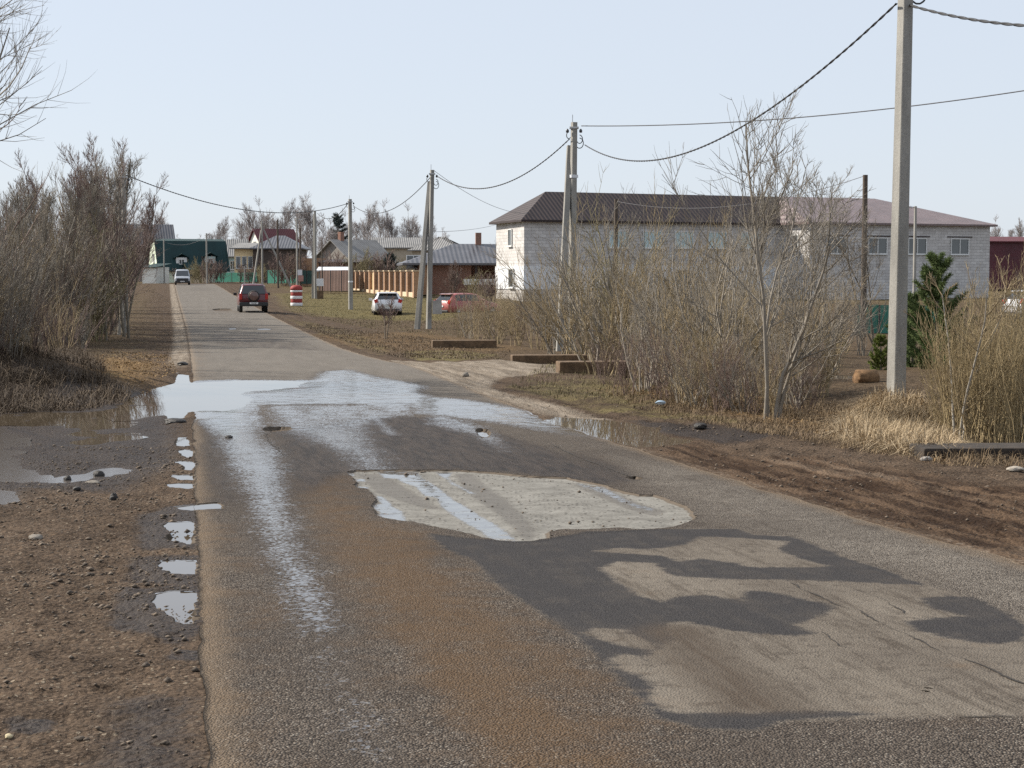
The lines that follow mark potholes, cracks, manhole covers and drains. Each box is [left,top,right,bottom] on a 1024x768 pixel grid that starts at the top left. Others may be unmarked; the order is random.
crack [790,582,1024,684]
pothole [475,428,492,438]
